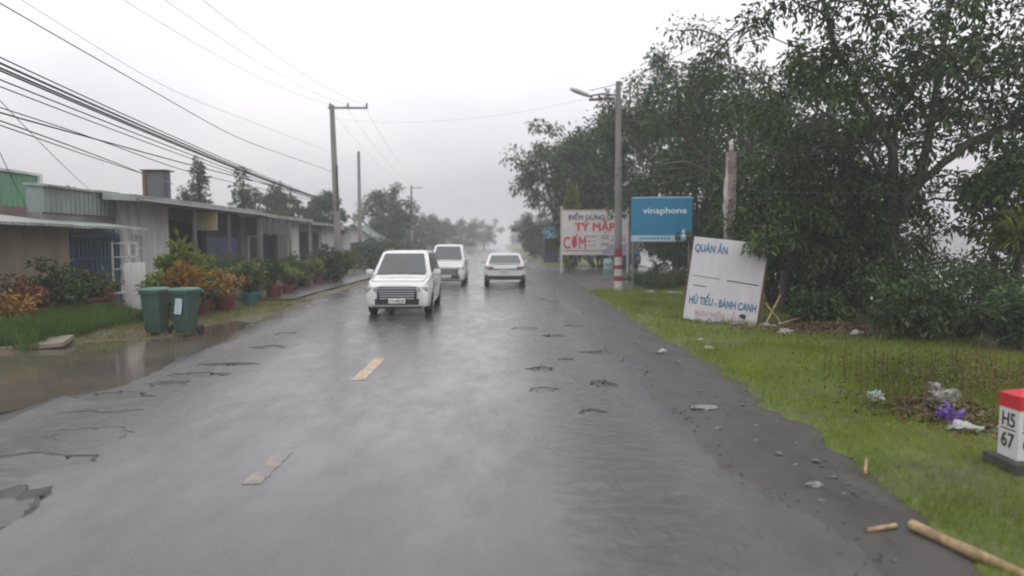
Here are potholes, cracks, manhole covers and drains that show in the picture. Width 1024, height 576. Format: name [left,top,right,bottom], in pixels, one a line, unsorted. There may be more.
pothole [589,379,620,388]
pothole [0,484,53,530]
